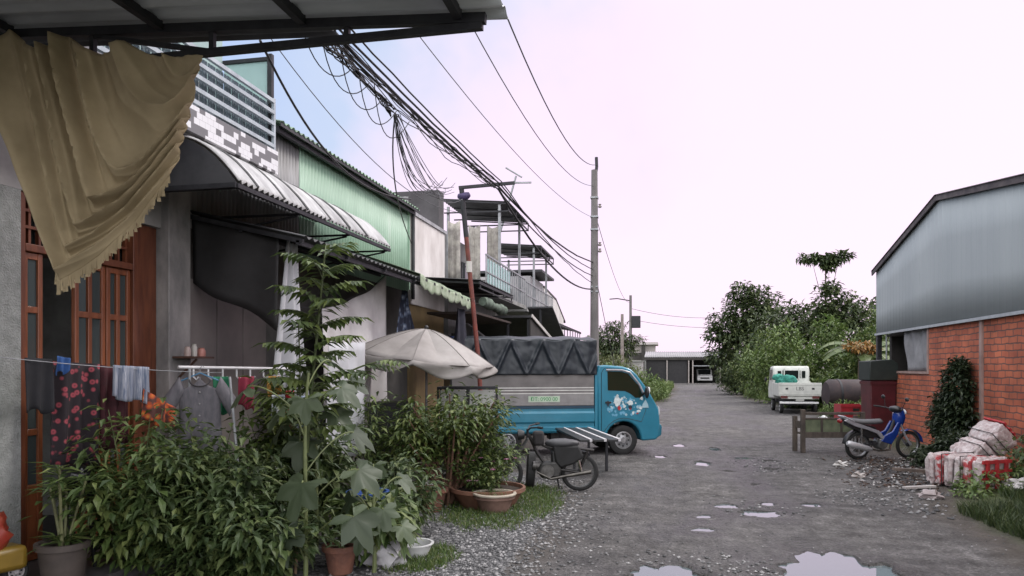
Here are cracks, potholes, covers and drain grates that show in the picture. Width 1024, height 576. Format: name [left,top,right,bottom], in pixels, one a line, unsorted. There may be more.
pothole [766,549,916,576]
pothole [731,508,790,519]
pothole [708,501,744,509]
pothole [612,559,721,576]
pothole [683,525,722,533]
